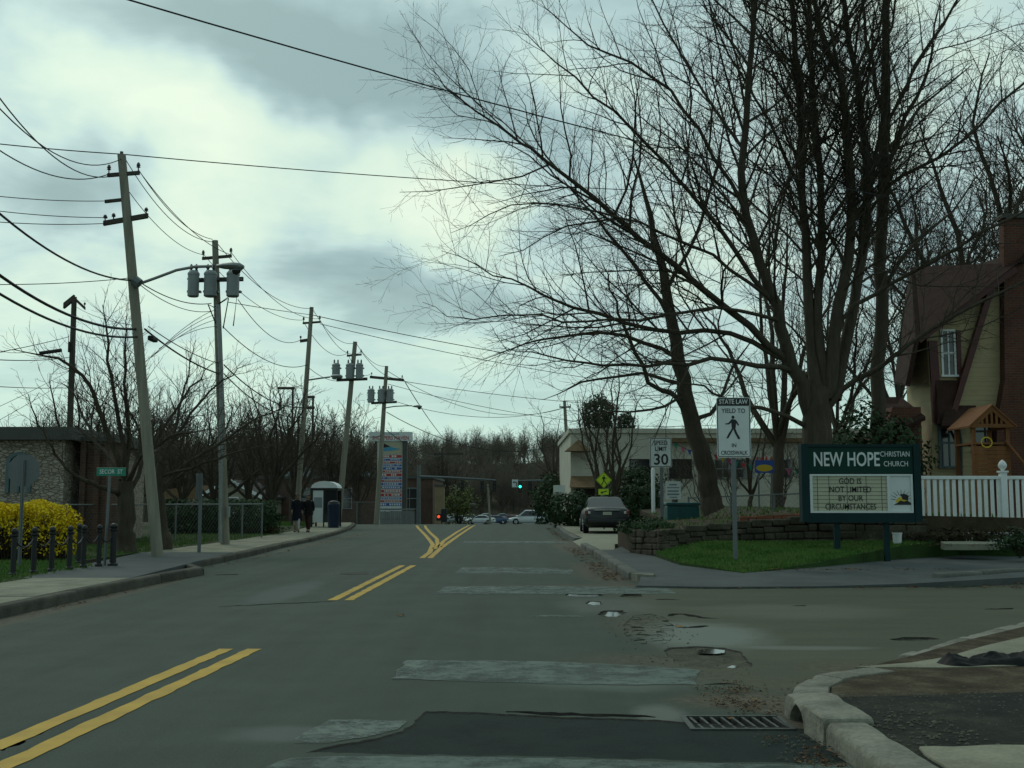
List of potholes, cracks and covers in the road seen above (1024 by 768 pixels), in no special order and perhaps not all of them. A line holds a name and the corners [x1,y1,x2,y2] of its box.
pothole [664,646,753,669]
drain grate [680,715,797,731]
